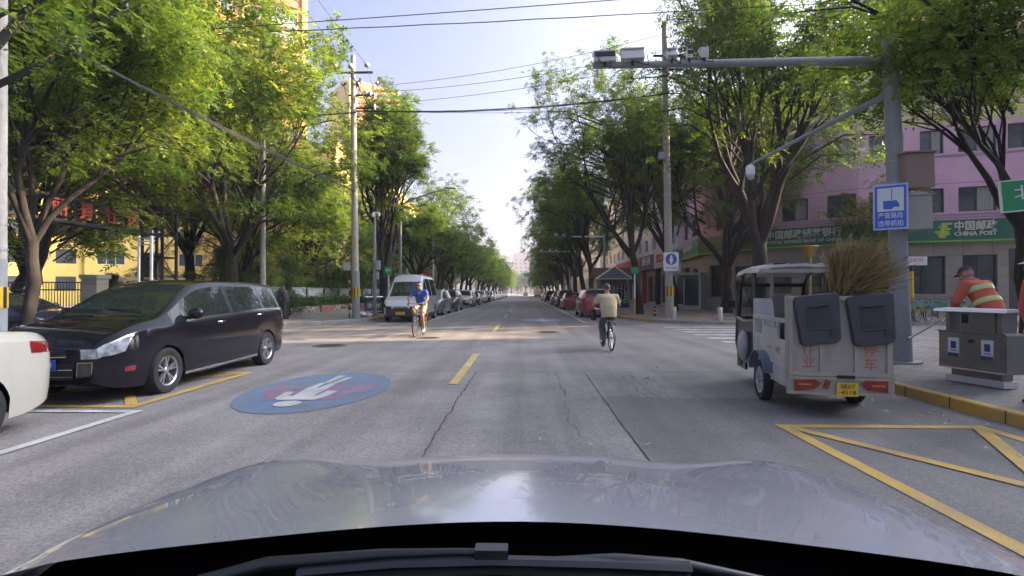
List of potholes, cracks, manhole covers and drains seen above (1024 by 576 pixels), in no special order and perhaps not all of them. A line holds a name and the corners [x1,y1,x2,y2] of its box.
crack [421,372,480,457]
crack [612,373,677,398]
